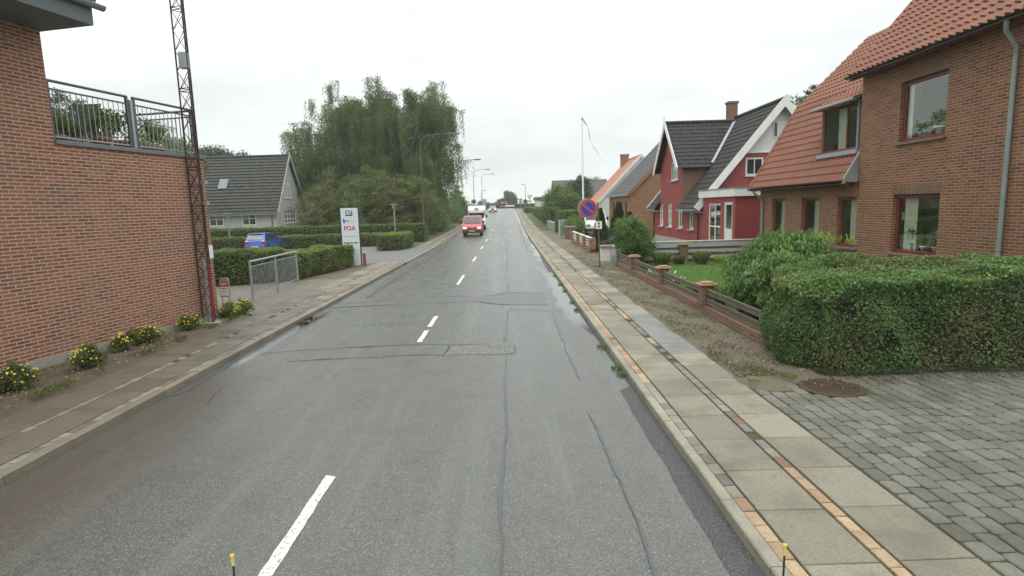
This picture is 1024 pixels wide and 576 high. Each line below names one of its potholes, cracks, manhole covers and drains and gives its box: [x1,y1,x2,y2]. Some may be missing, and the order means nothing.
manhole cover [798,378,866,398]
